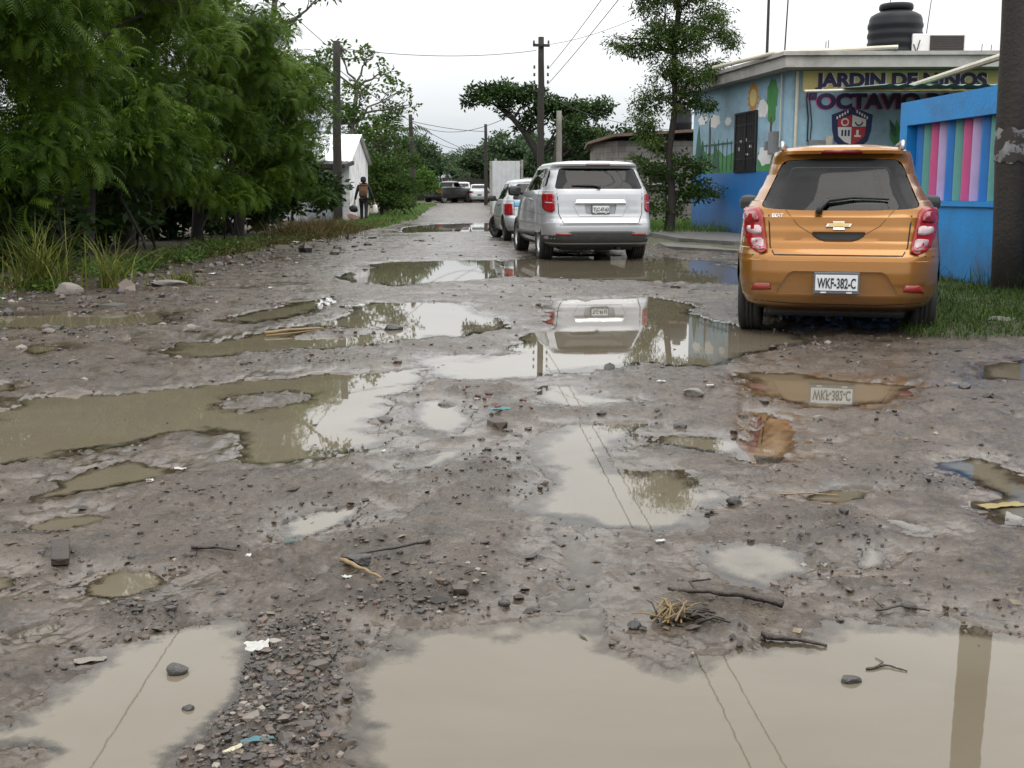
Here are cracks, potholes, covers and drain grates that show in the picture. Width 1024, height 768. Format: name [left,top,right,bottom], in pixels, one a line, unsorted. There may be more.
pothole [356,258,513,286]
pothole [207,293,348,324]
pothole [0,607,287,768]
pothole [730,407,822,464]
pothole [147,298,533,358]
pothole [397,222,489,233]
pothole [0,452,202,503]
pothole [917,452,1024,527]
pothole [494,254,739,284]
pothole [497,417,764,538]
pothole [66,557,187,604]
